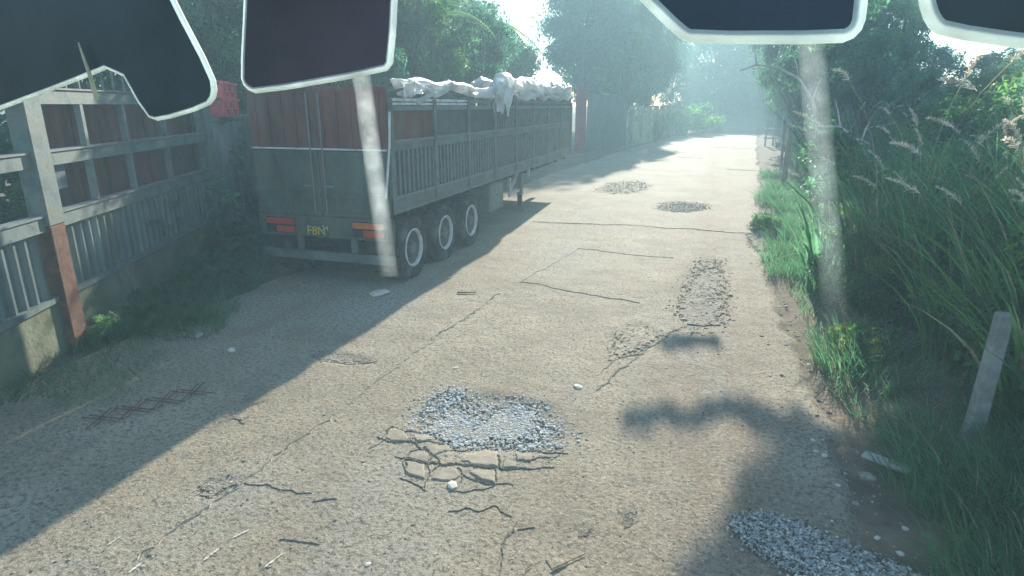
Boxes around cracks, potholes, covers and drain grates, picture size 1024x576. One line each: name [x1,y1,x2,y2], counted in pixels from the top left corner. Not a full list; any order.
pothole [602,323,663,366]
pothole [595,180,659,195]
pothole [652,200,715,214]
crack [243,482,337,502]
pothole [665,253,738,343]
crack [368,426,563,576]
pothole [392,381,588,463]
